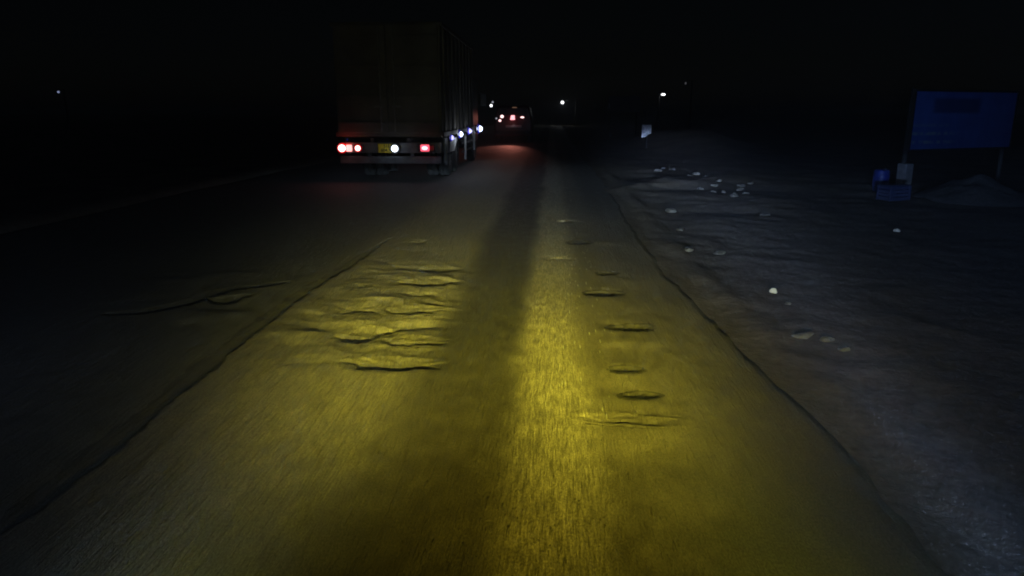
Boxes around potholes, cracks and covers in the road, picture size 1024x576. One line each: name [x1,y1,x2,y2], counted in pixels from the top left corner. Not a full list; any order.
crack [0,238,390,534]
pothole [604,323,655,332]
pothole [606,365,646,374]
pothole [617,390,665,400]
